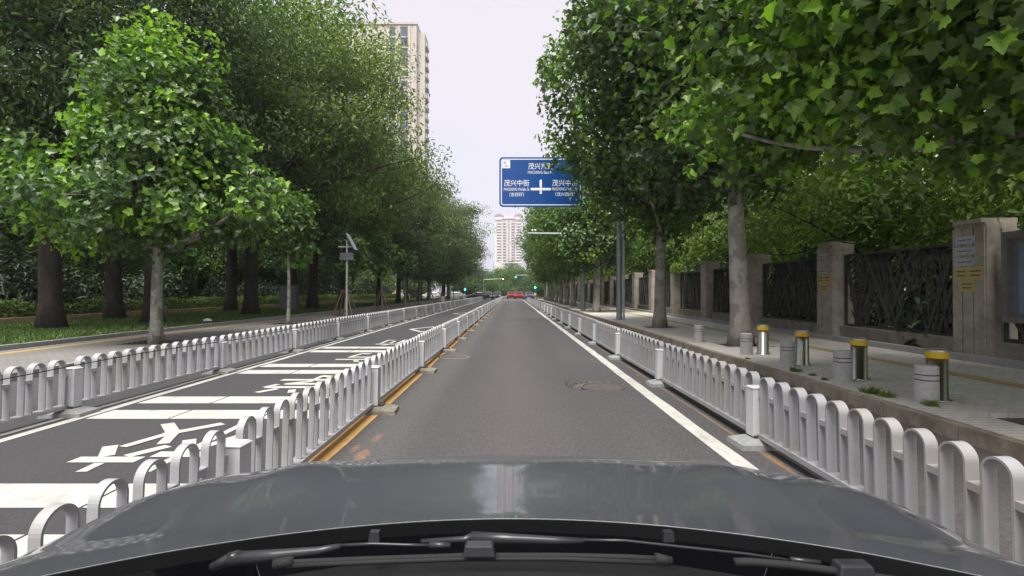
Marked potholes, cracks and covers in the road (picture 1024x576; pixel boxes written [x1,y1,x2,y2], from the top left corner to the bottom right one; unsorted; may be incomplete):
manhole cover [581,383,626,391]
